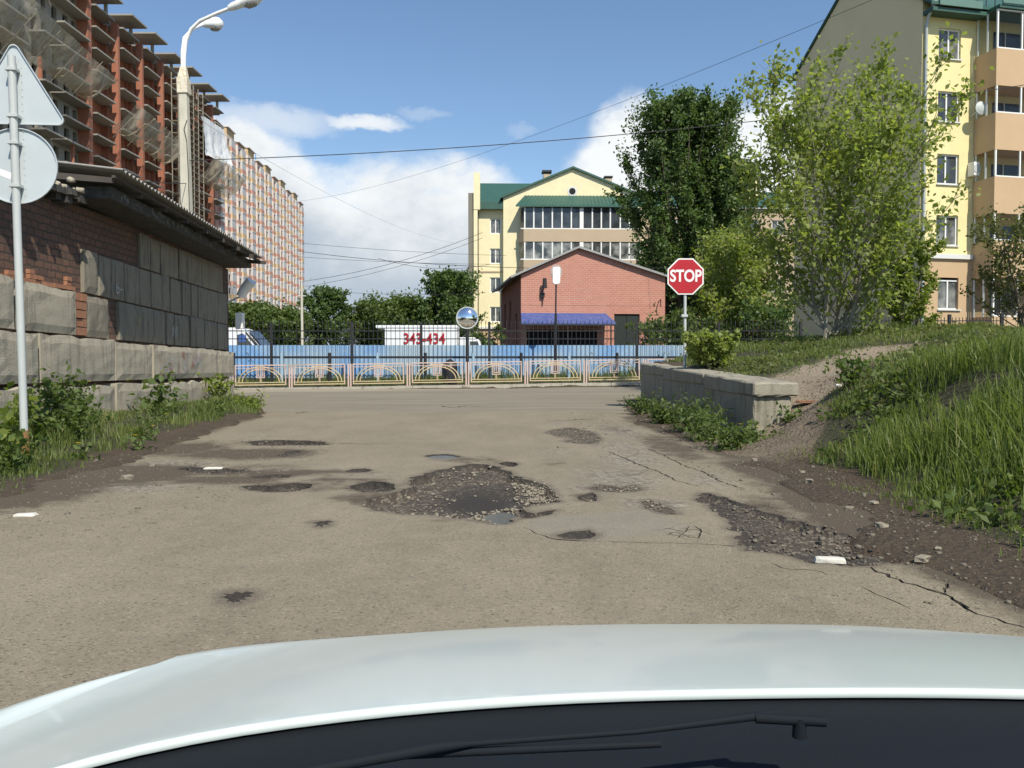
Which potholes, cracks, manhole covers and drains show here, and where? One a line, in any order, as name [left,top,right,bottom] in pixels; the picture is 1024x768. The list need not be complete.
pothole [695,493,889,567]
crack [667,526,710,539]
pothole [587,484,642,492]
pothole [557,530,596,539]
crack [611,449,741,488]
pothole [641,500,676,514]
pothole [577,492,597,502]
crack [866,567,1024,628]
pothole [545,428,601,444]
pothole [242,483,312,492]
pothole [362,464,561,524]
pothole [350,481,395,494]
